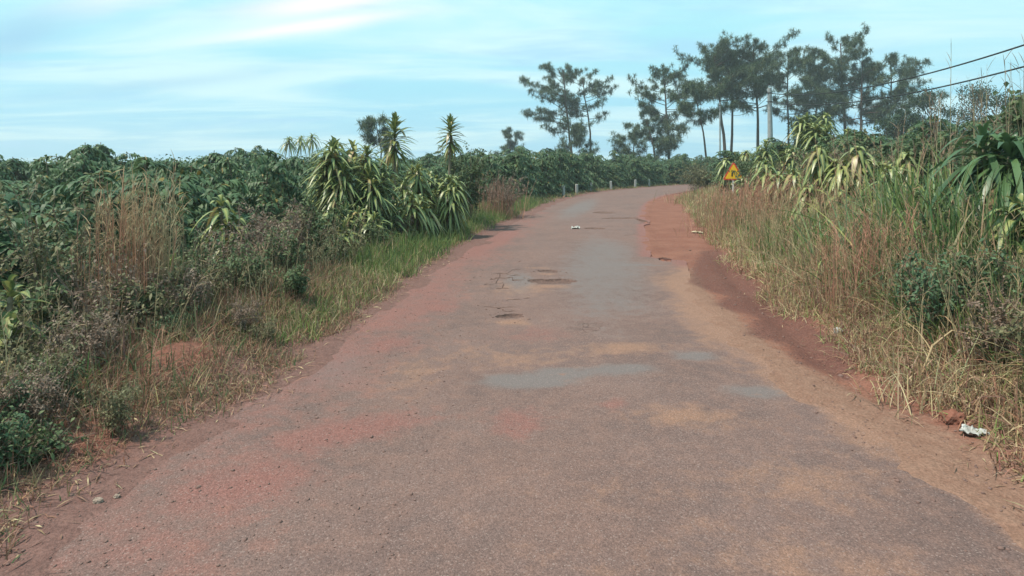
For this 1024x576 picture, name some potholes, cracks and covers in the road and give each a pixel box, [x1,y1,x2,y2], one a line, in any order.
crack [484,269,528,312]
